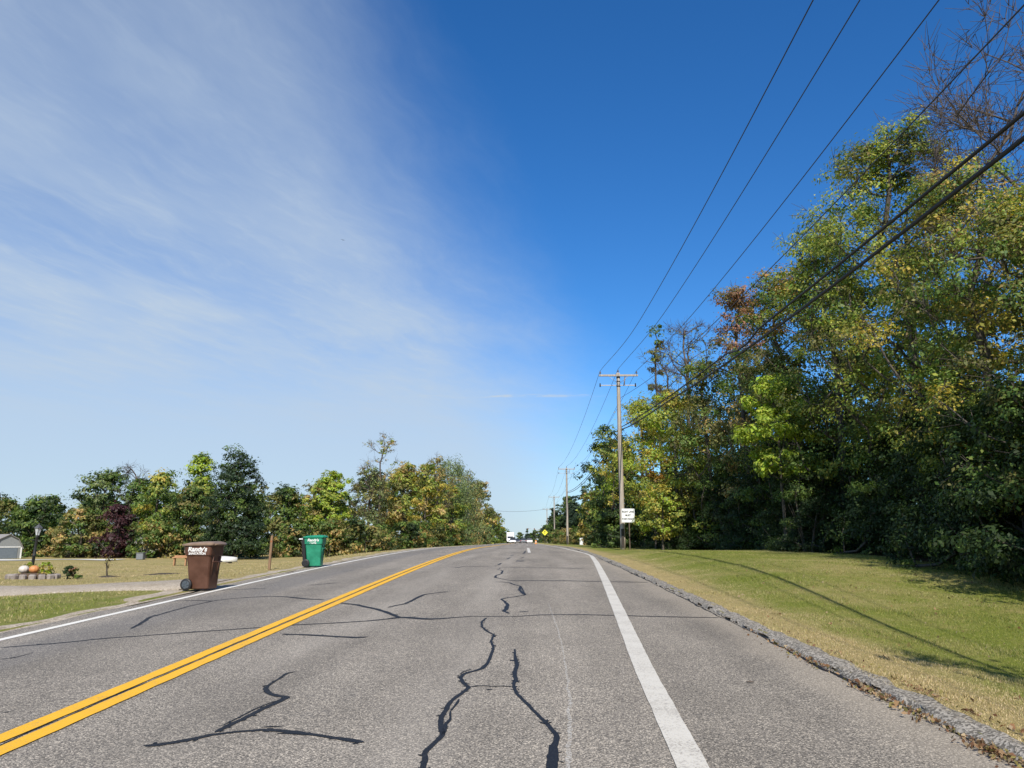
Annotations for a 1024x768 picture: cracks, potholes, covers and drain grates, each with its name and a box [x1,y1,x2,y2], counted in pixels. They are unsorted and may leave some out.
crack [439,669,512,735]
crack [494,551,611,594]
